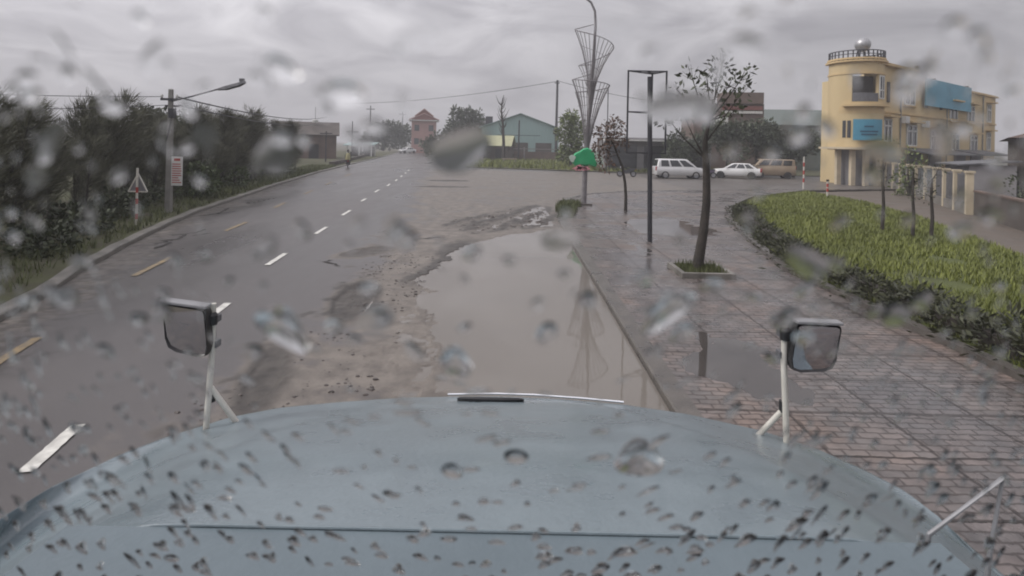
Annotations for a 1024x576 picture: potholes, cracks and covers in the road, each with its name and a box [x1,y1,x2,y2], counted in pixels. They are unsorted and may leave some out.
pothole [239,349,286,409]
crack [154,208,236,248]
pothole [340,246,394,257]
pothole [446,205,561,233]
pothole [384,227,552,397]
